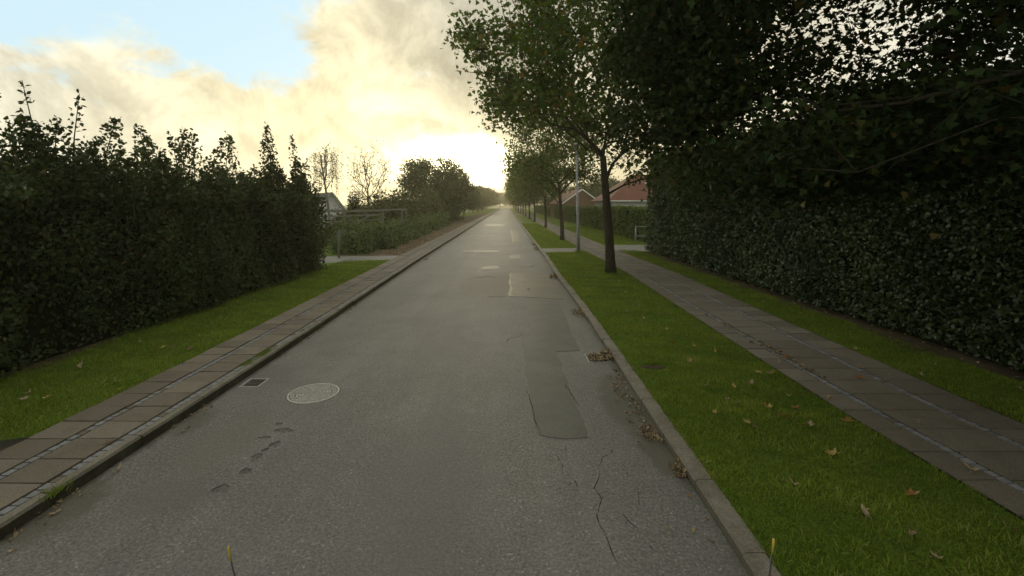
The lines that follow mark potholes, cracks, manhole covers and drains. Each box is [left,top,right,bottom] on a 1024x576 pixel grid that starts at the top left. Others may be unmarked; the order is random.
drain grate [239,378,270,387]
crack [557,444,655,562]
manhole cover [286,383,340,404]
